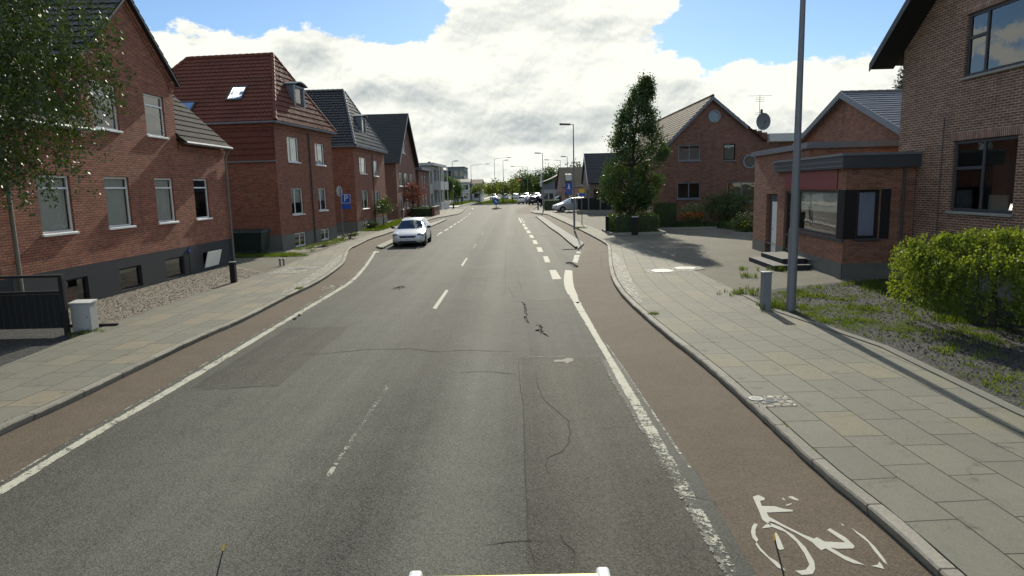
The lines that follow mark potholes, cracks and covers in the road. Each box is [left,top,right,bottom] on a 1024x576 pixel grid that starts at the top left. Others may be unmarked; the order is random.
crack [536,374,571,470]
